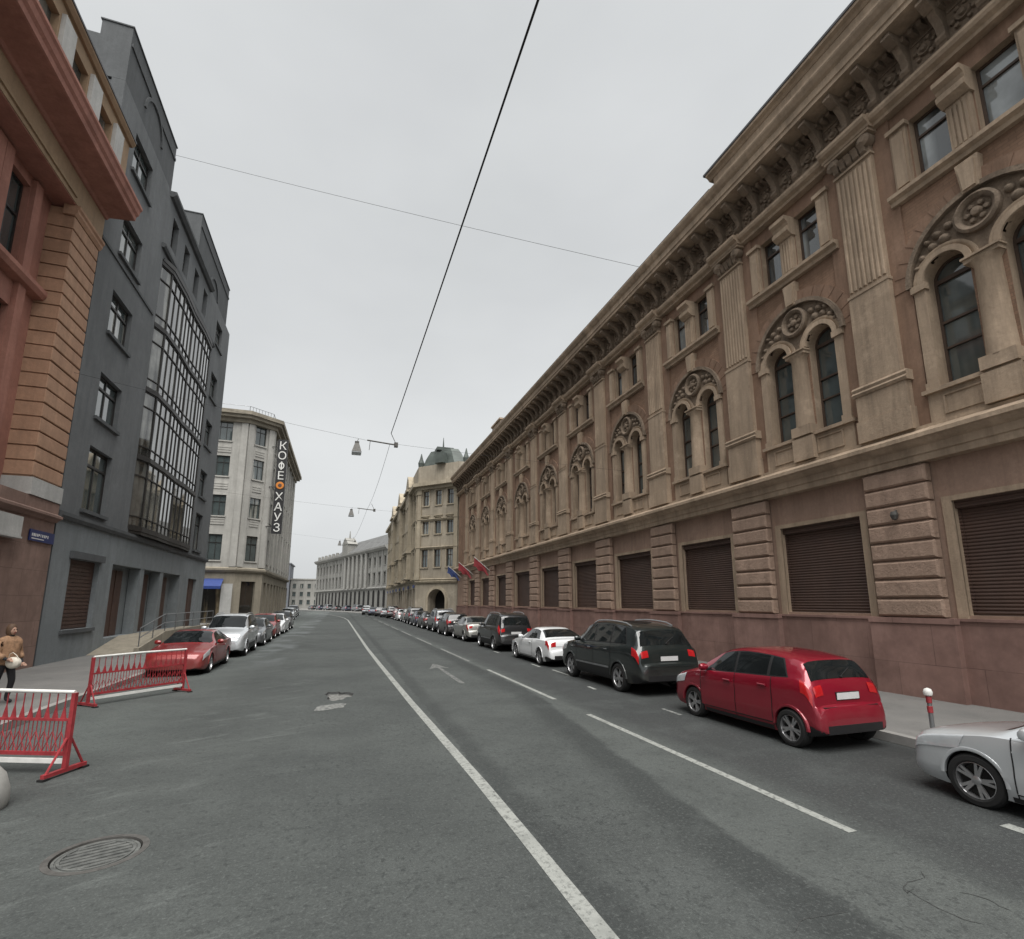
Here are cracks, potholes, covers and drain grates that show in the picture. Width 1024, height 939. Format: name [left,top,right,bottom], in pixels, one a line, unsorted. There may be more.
pothole [325,692,354,701]
crack [903,872,1011,924]
manhole cover [39,834,150,876]
